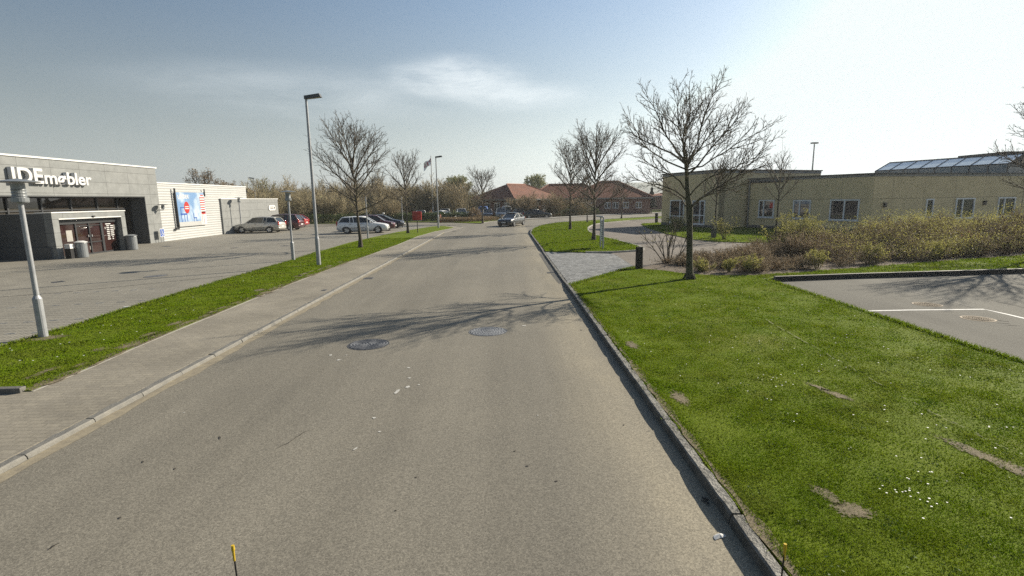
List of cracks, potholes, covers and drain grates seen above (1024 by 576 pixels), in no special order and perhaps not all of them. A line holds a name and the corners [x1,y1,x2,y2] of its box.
manhole cover [347,339,390,350]
manhole cover [469,327,507,336]
